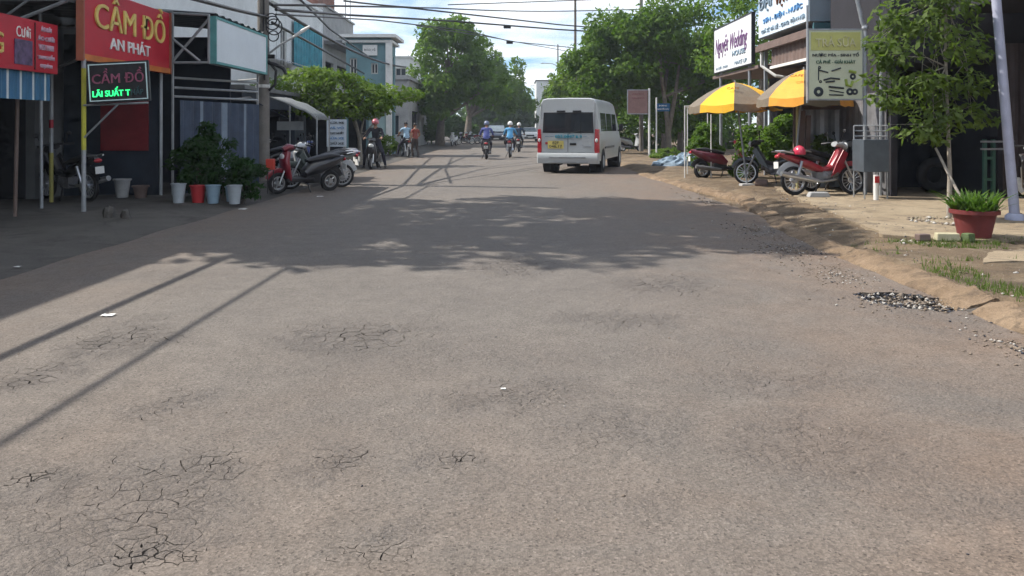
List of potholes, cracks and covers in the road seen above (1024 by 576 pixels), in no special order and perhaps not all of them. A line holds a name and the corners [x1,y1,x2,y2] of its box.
crack [285,323,438,355]
crack [51,318,185,358]
crack [314,443,369,473]
crack [326,536,414,572]
crack [0,362,78,394]
crack [5,446,258,576]
pothole [853,292,962,312]
crack [439,448,487,470]
